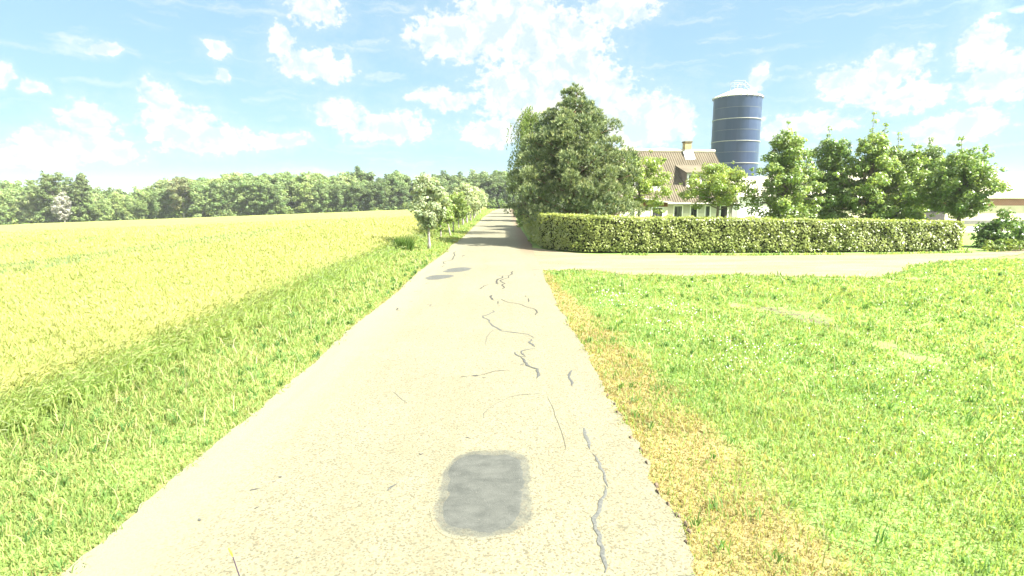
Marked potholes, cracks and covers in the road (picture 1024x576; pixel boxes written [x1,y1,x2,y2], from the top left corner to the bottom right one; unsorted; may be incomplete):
crack [480,271,538,315]
crack [483,393,566,447]
